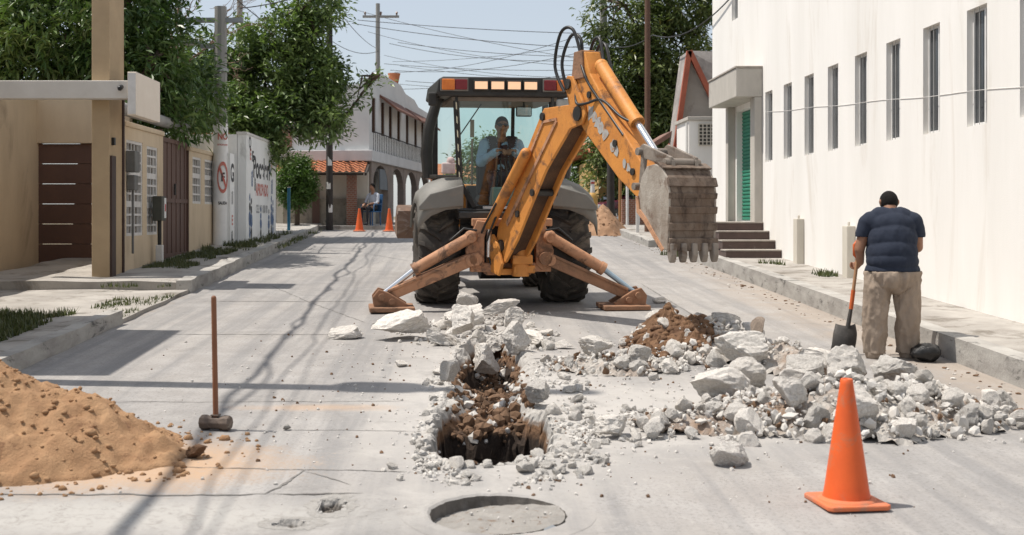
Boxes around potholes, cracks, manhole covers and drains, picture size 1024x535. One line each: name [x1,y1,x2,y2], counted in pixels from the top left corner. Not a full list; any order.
manhole cover [400,486,596,535]
pothole [257,517,329,530]
crack [3,466,409,496]
pothole [414,335,573,535]
pothole [303,494,360,518]
